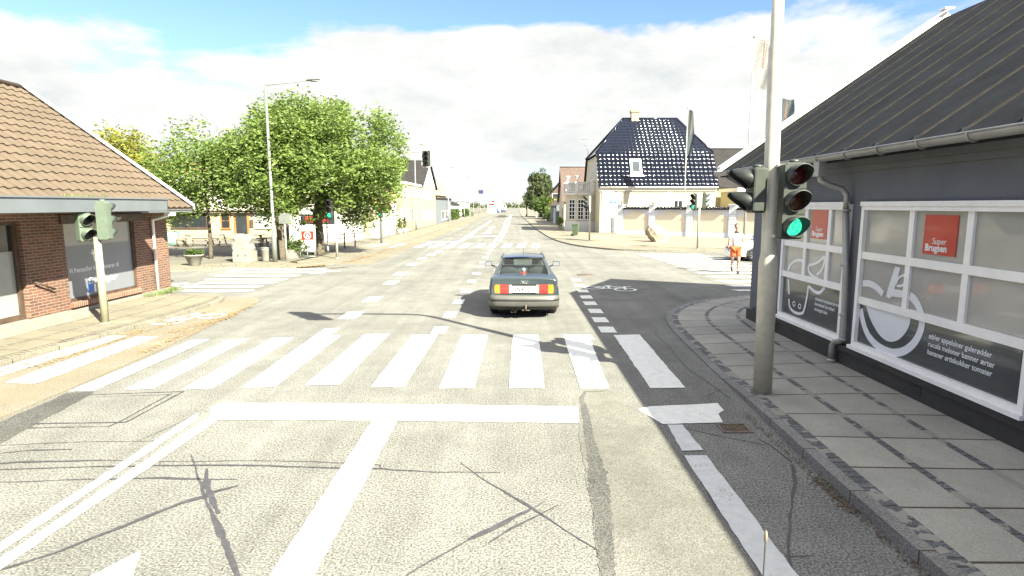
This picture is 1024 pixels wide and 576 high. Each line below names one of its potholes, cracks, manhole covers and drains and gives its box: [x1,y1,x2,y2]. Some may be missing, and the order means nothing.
drain grate [715,423,754,433]
crack [688,428,814,570]
